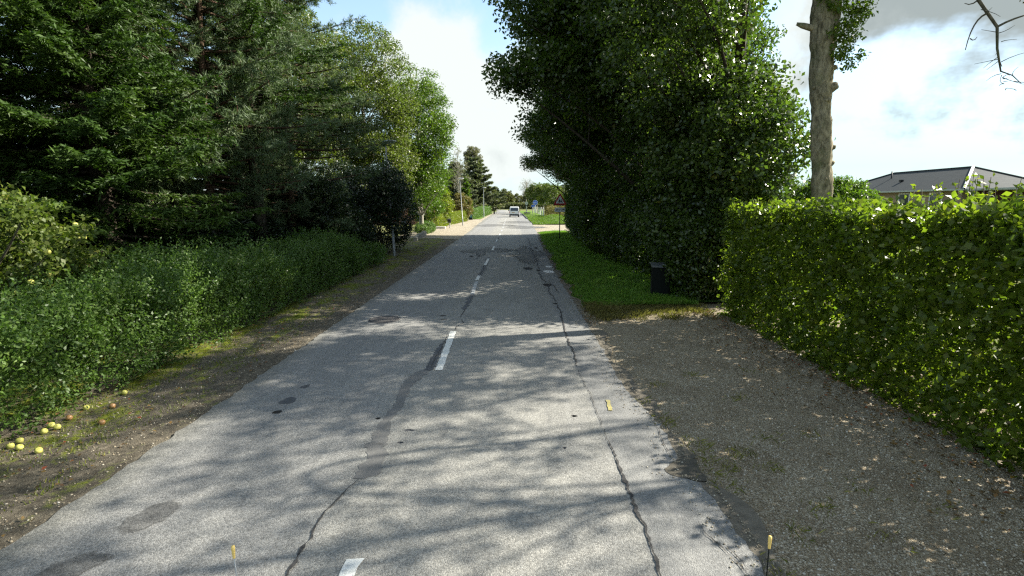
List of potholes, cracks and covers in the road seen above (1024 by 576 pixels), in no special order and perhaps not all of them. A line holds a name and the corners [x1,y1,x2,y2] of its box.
crack [528,239,607,439]
